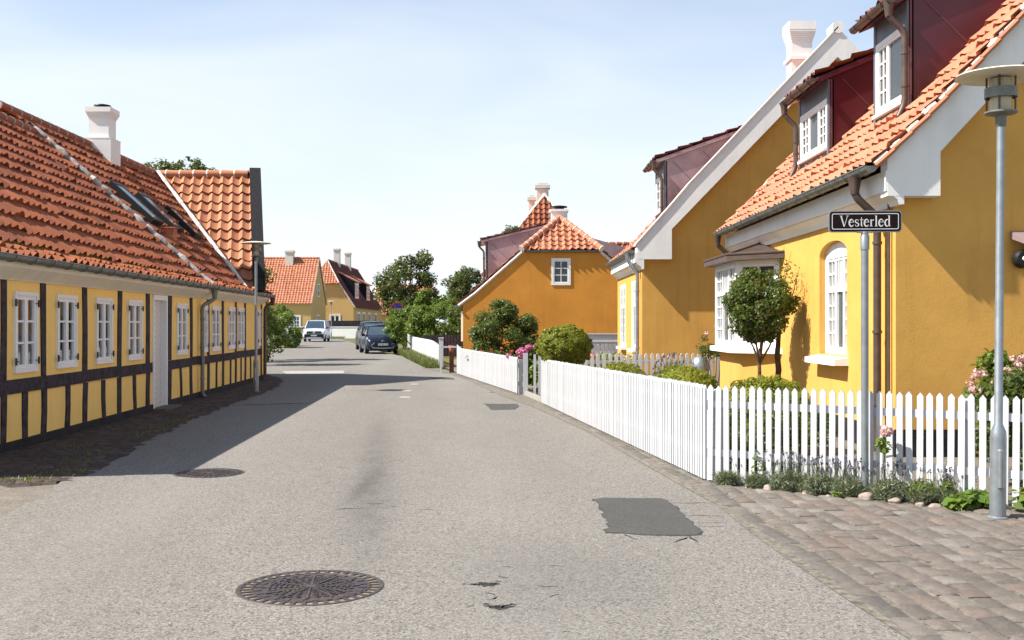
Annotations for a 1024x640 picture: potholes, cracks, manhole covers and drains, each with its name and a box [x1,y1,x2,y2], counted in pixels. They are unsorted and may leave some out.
manhole cover [173,468,245,478]
manhole cover [235,570,384,607]
